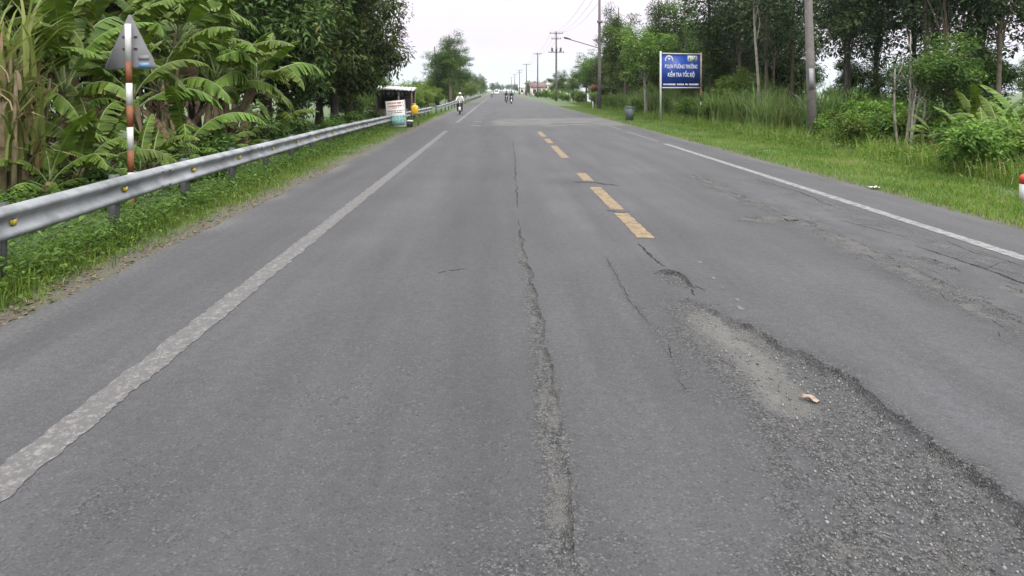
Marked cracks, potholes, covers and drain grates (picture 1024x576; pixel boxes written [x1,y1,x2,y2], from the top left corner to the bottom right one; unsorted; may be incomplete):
pothole [679,297,1024,576]
crack [513,142,582,576]
crack [638,244,664,266]
crack [608,261,685,388]
pothole [654,269,694,288]
crack [688,173,1024,337]
